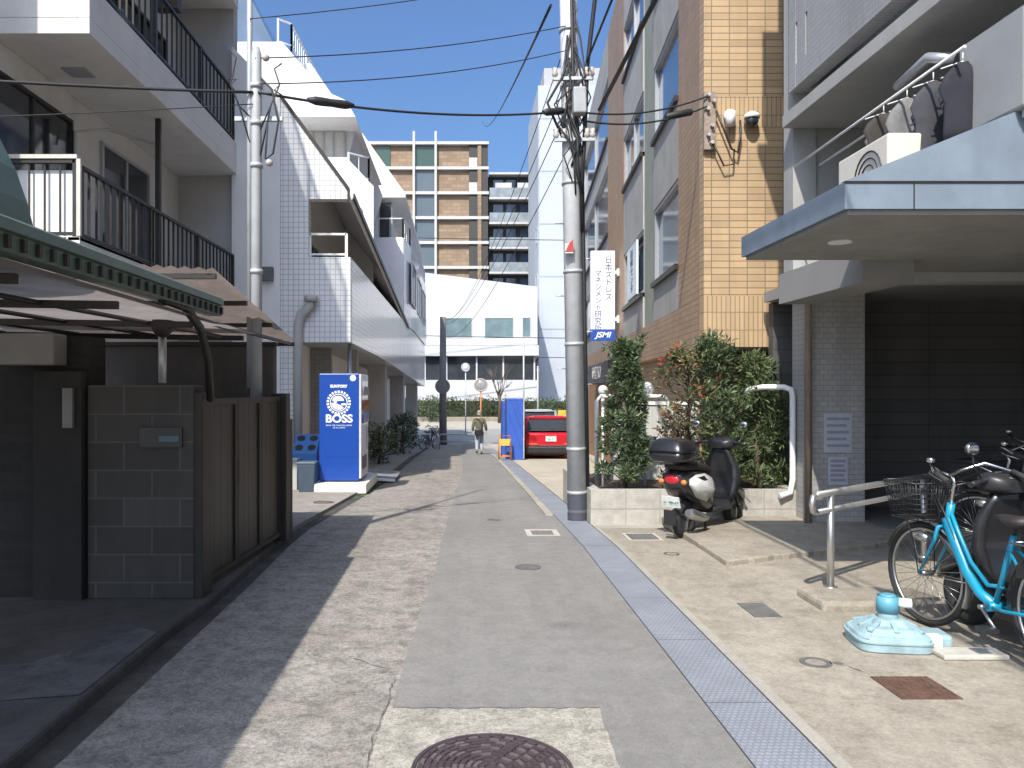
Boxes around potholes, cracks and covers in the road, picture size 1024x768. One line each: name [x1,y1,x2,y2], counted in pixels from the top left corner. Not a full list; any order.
crack [347,655,395,764]
manhole cover [870,676,963,700]
manhole cover [737,603,782,617]
manhole cover [799,657,832,668]
manhole cover [411,733,573,768]
